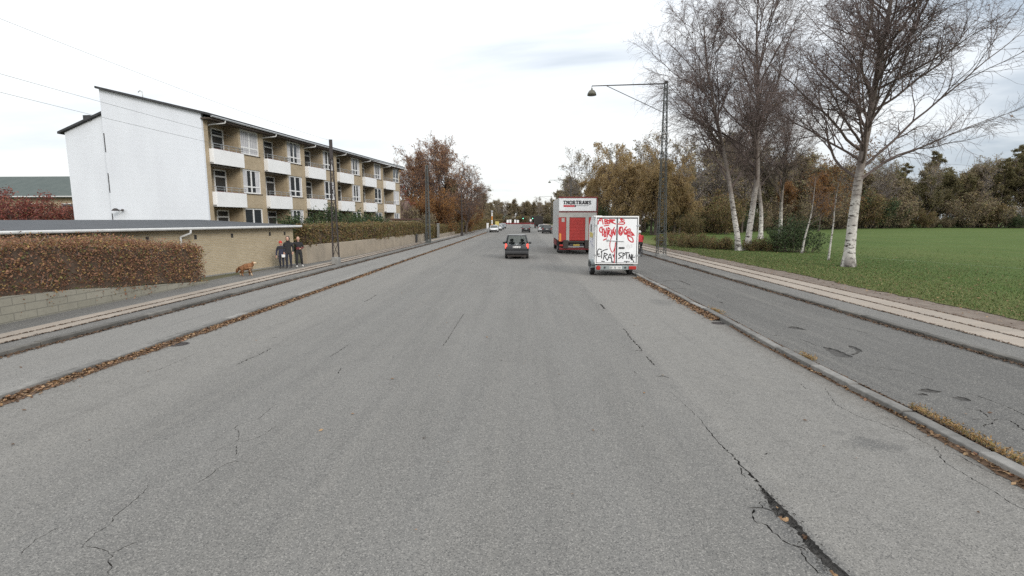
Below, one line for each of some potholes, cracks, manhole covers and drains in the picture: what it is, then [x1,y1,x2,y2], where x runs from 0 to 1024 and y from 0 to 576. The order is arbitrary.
crack [82,483,151,572]
crack [197,404,276,483]
crack [750,502,819,573]
crack [825,389,1024,509]
